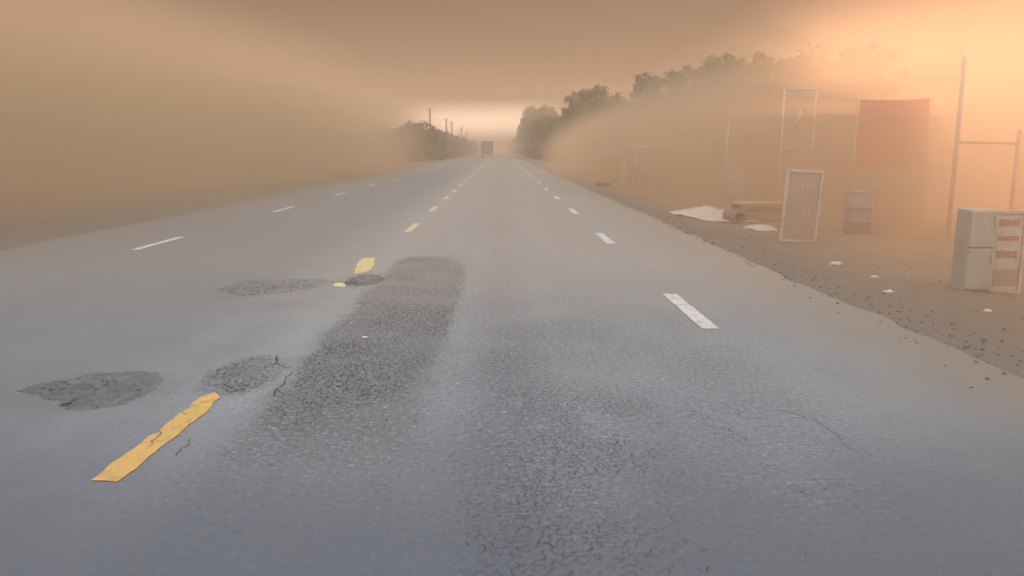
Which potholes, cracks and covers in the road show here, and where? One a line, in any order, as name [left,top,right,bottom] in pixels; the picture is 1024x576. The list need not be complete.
crack [201,256,466,448]
crack [453,316,709,576]
crack [672,353,859,557]
